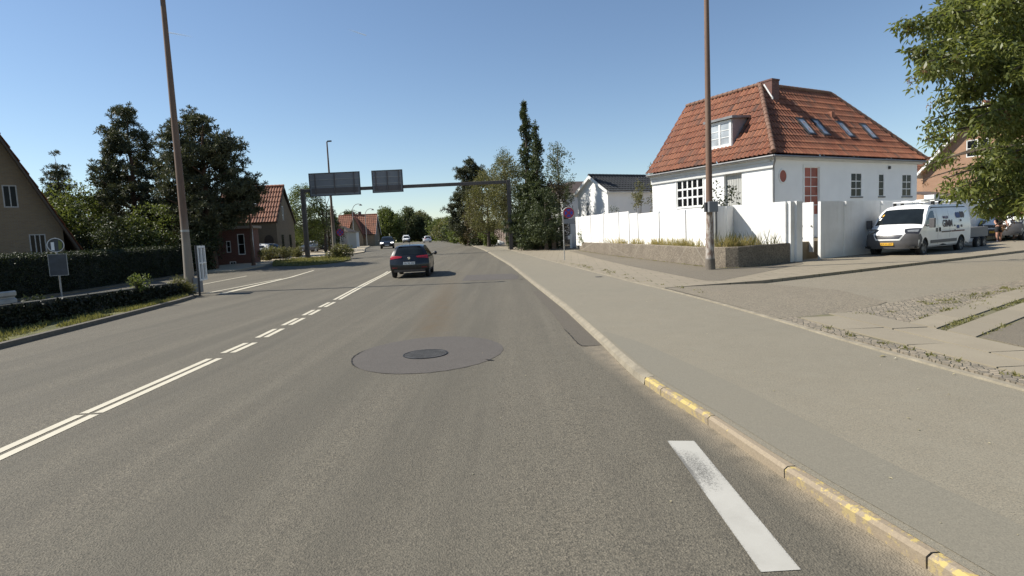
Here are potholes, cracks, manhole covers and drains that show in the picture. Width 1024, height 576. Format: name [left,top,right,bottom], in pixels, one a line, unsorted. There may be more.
manhole cover [403,349,448,359]
